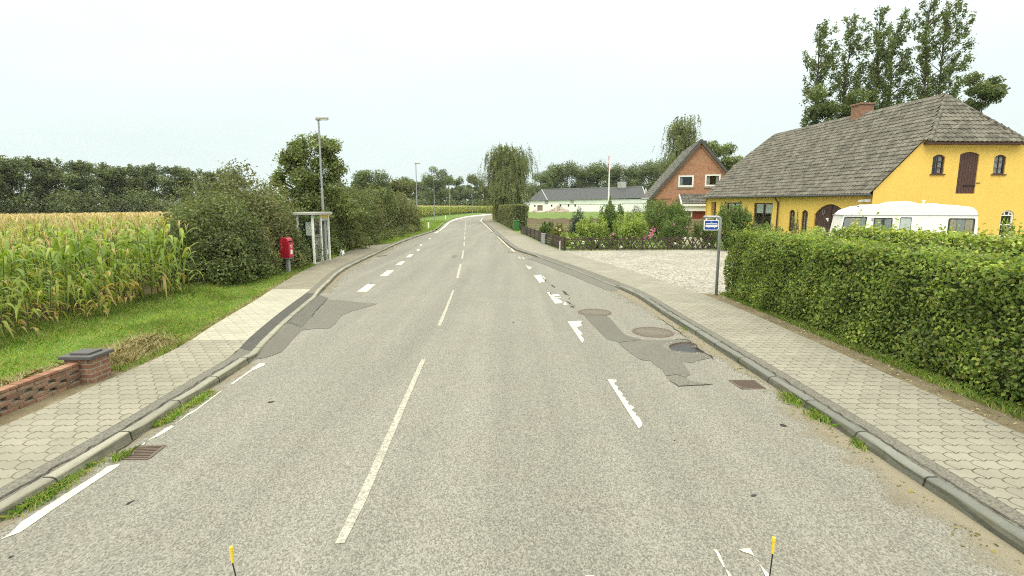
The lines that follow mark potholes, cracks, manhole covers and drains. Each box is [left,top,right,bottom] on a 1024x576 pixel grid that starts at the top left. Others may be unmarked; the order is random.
drain grate [729,380,766,390]
manhole cover [632,327,674,338]
drain grate [121,445,166,460]
